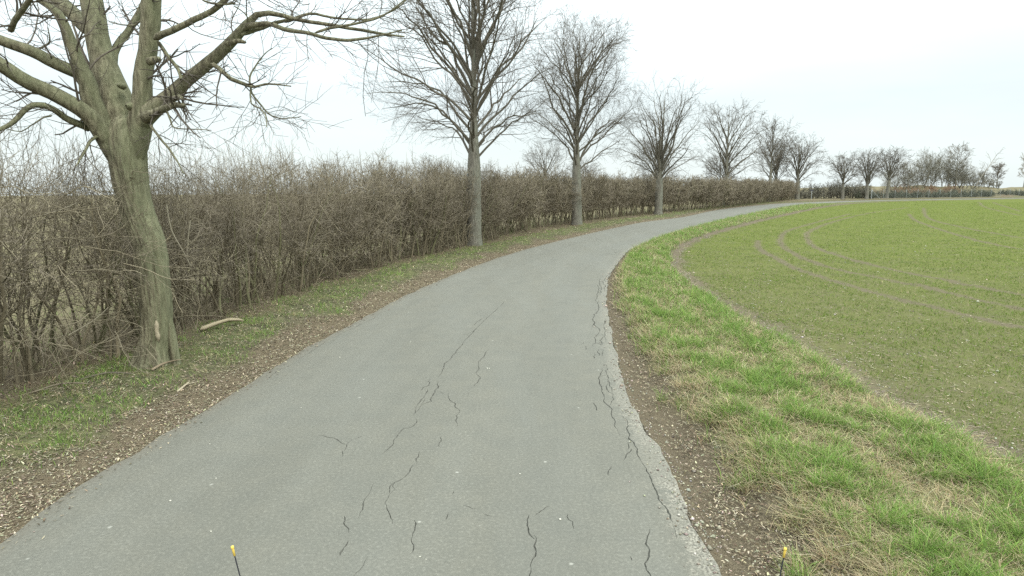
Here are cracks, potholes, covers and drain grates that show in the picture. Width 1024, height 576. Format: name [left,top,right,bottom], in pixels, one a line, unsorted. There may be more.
crack [339,454,419,573]
crack [382,302,504,454]
crack [581,273,677,576]
crack [526,506,549,576]
